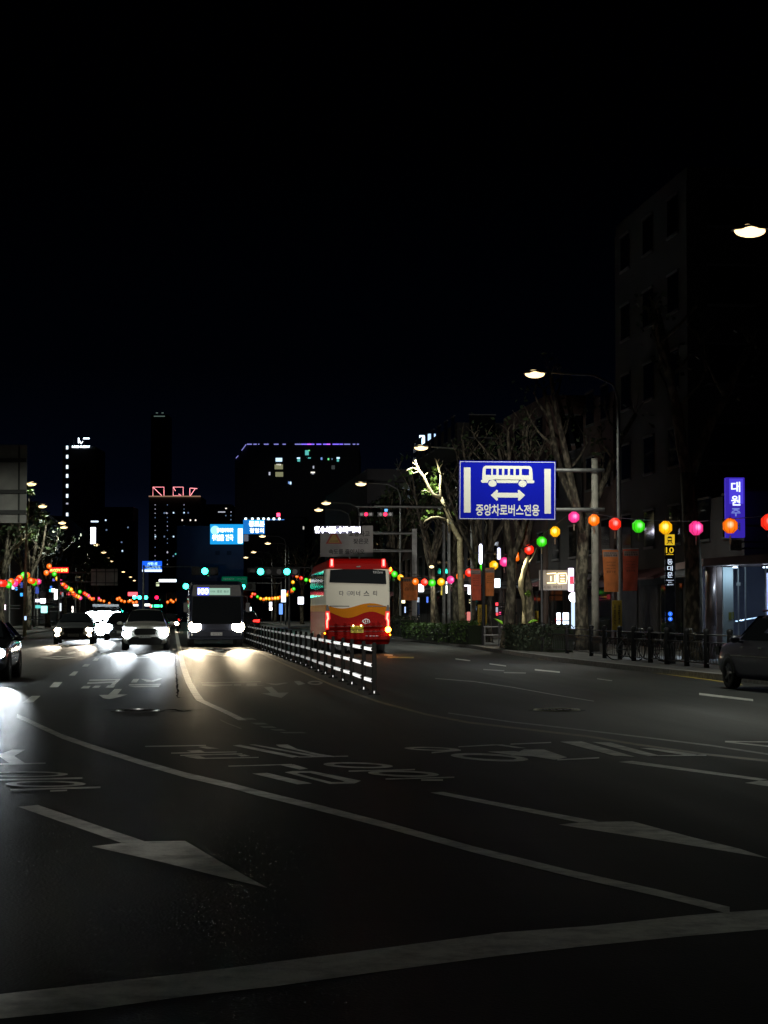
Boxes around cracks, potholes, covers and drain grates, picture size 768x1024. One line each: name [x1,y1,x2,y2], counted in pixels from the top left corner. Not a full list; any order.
crack [169,653,189,712]
